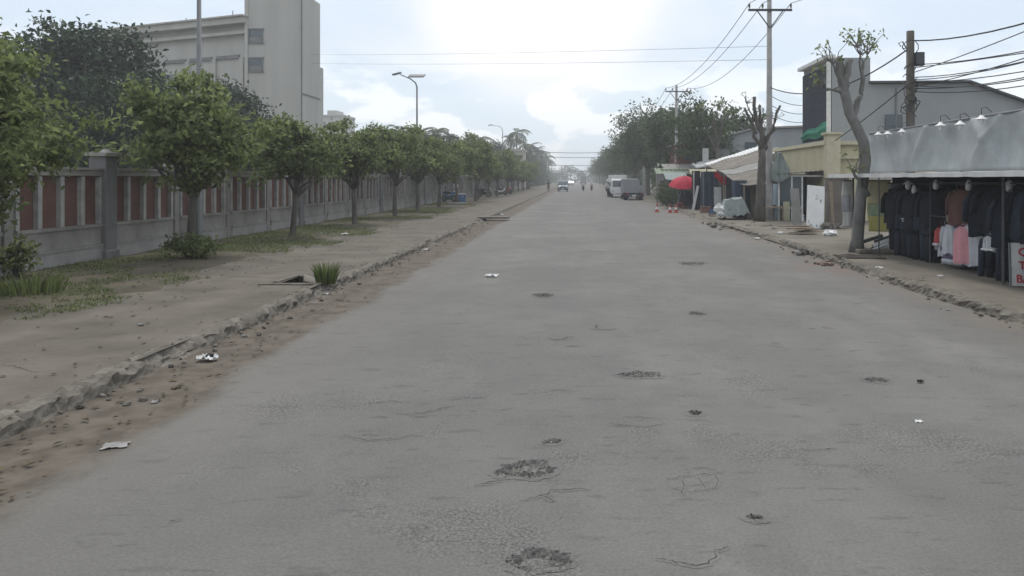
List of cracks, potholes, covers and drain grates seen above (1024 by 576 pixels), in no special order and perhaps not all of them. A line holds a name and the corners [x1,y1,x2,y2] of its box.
pothole [610,370,666,379]
pothole [538,436,566,446]
crack [656,545,732,569]
pothole [859,376,893,384]
crack [667,466,725,499]
crack [343,393,528,442]
crack [547,325,620,348]
pothole [487,458,563,481]
pothole [682,409,708,417]
crack [474,479,591,503]
pothole [738,511,771,524]
pothole [499,544,580,576]
